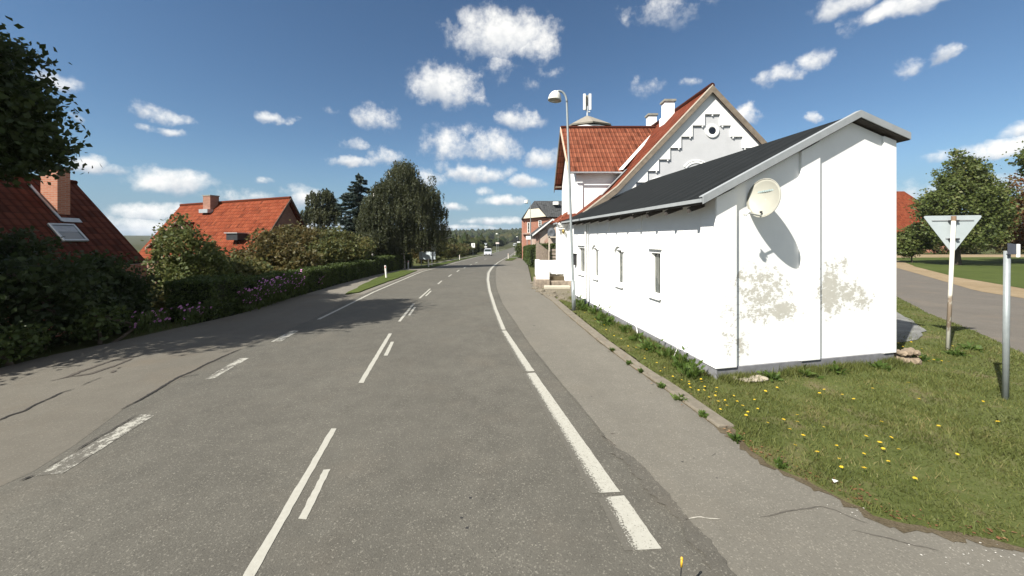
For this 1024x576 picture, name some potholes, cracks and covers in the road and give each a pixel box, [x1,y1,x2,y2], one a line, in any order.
crack [0,350,237,480]
crack [762,506,936,550]
